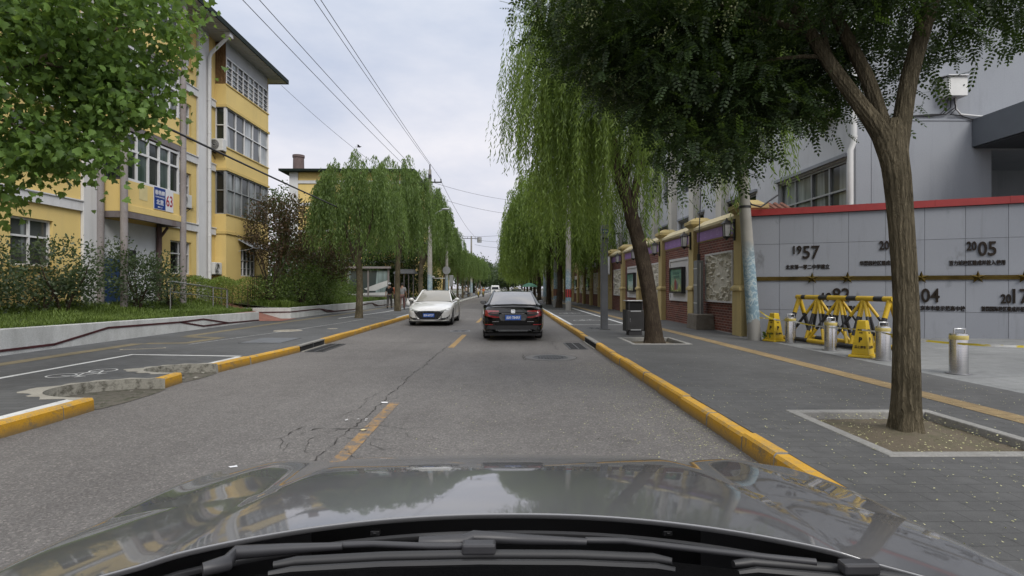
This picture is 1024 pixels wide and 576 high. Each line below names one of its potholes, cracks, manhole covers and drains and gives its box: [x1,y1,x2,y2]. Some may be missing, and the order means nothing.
crack [239,342,451,461]
drain grate [296,339,345,352]
drain grate [564,336,600,349]
